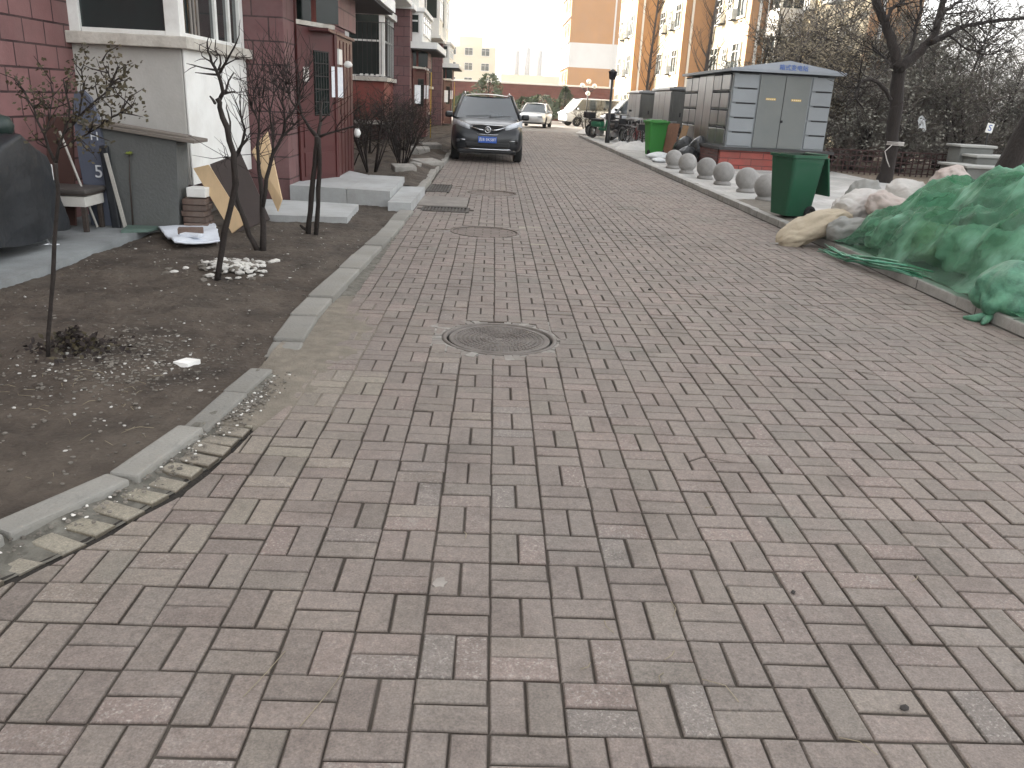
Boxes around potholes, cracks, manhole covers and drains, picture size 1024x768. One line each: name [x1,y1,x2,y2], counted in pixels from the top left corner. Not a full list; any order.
manhole cover [443,225,529,239]
manhole cover [429,319,568,361]
drain grate [426,184,452,193]
